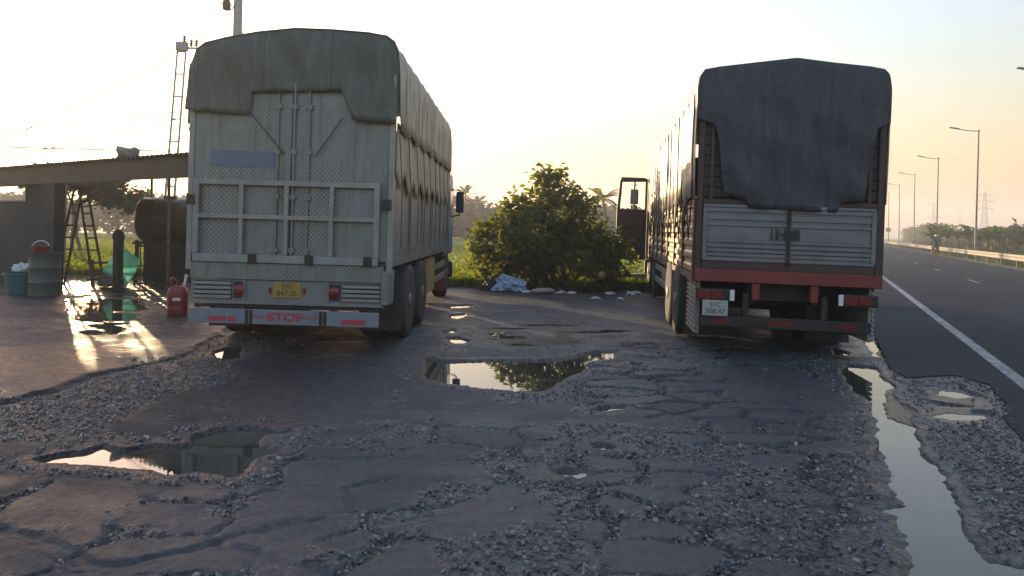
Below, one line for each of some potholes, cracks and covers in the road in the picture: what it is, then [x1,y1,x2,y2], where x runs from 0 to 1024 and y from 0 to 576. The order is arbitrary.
pothole [443,335,475,344]
pothole [27,423,317,480]
pothole [419,348,623,392]
crack [0,341,901,576]
pothole [834,362,1024,576]
